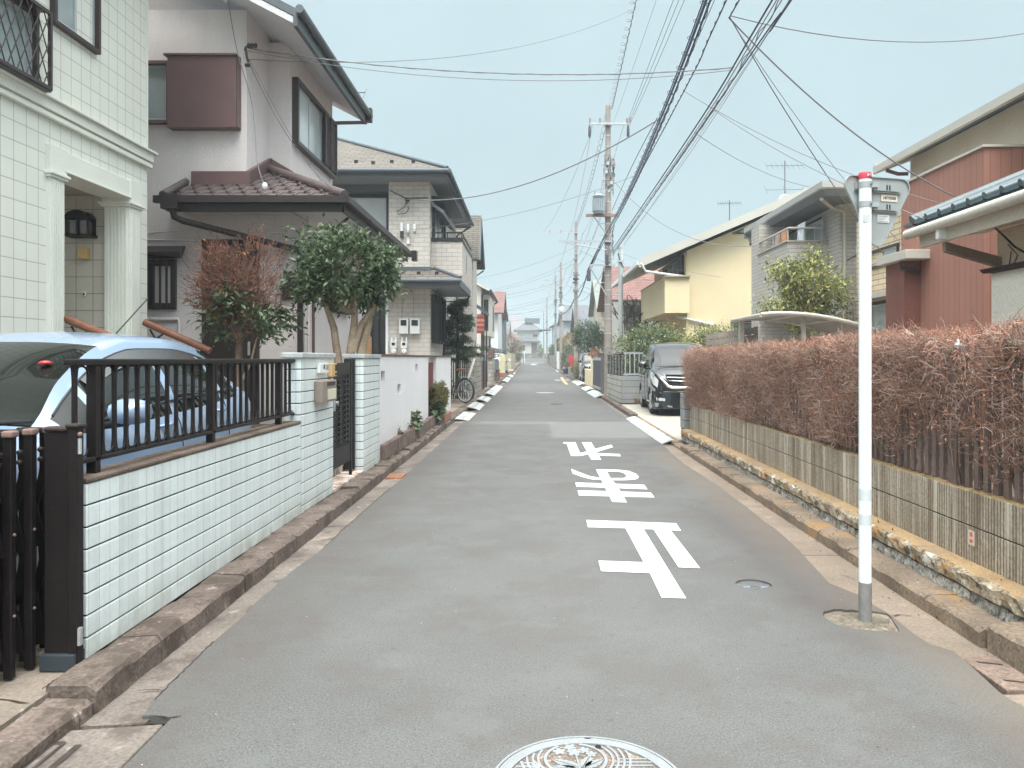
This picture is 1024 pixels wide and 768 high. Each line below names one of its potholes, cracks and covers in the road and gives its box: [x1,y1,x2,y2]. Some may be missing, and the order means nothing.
utility cover [736,581,771,589]
manhole cover [496,736,676,768]
